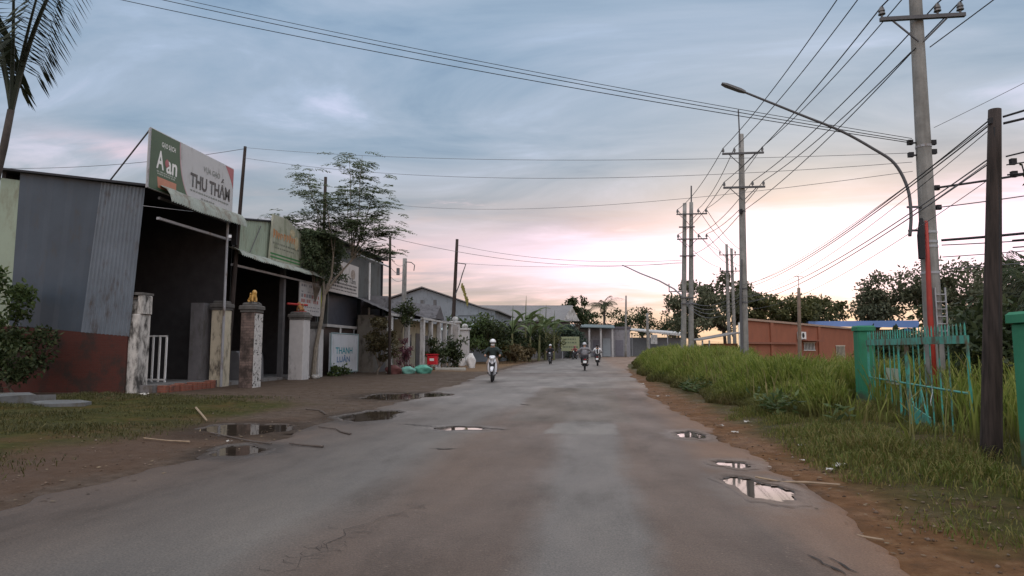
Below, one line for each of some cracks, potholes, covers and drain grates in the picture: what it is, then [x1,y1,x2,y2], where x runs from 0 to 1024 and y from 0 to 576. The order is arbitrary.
pothole [187,422,303,438]
pothole [327,409,408,423]
pothole [667,429,718,441]
pothole [196,442,276,459]
crack [807,554,859,575]
pothole [706,472,813,509]
pothole [354,392,455,401]
crack [259,503,425,575]
pothole [701,459,763,471]
